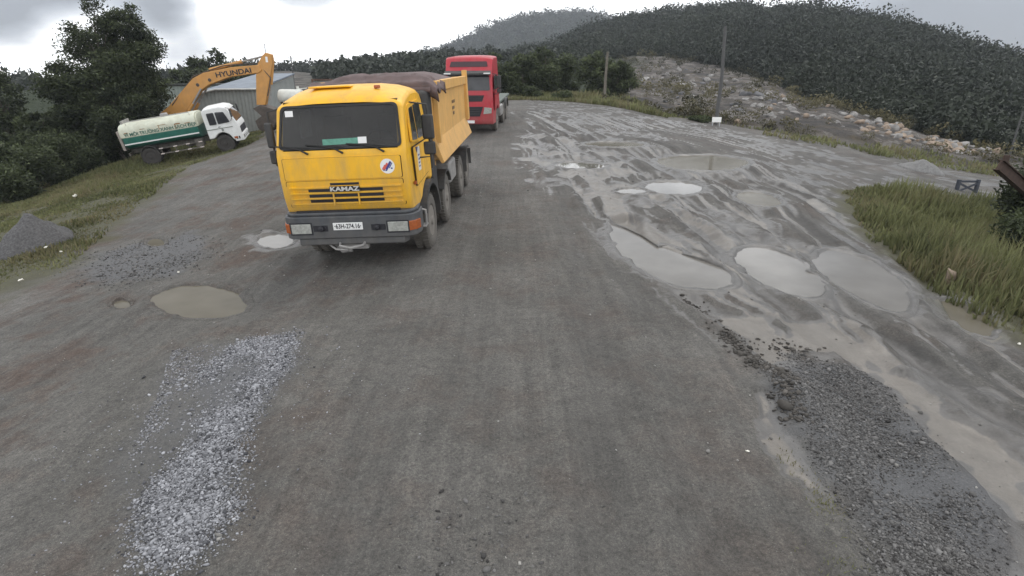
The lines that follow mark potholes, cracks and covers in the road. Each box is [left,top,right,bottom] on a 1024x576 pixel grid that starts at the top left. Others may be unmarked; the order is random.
pothole [720,243,837,304]
pothole [797,246,925,319]
pothole [731,190,787,207]
pothole [549,160,611,170]
pothole [650,154,753,172]
pothole [143,281,255,321]
pothole [636,179,709,196]
pothole [252,231,299,249]
pothole [598,220,743,293]
pothole [108,297,135,309]
